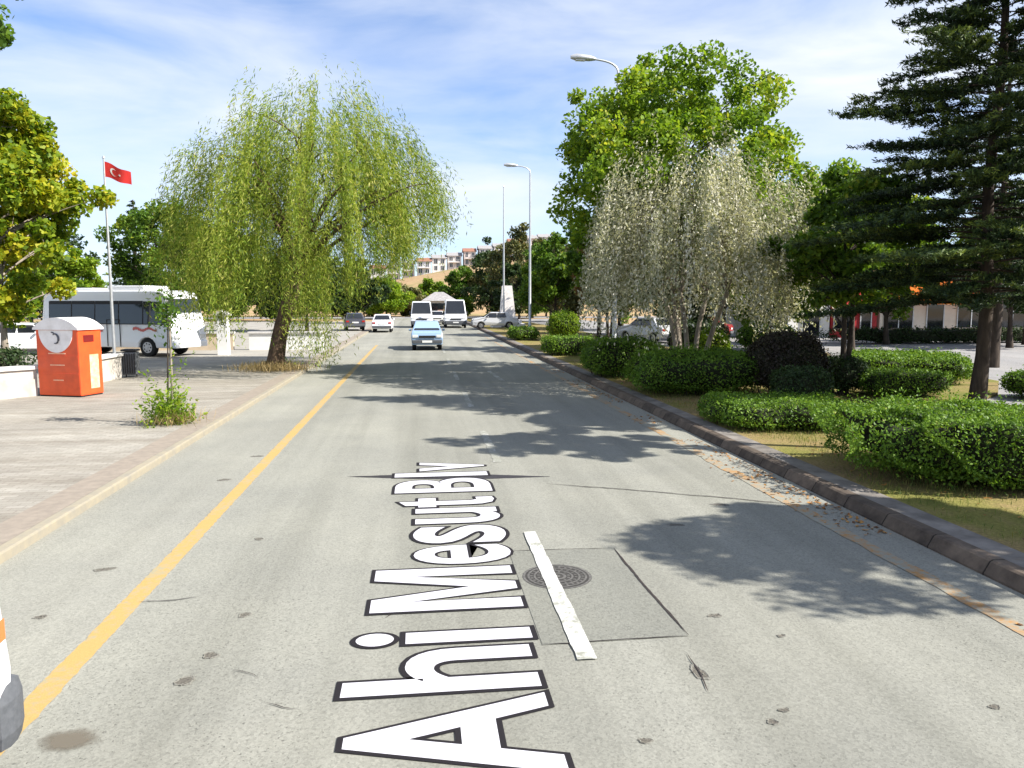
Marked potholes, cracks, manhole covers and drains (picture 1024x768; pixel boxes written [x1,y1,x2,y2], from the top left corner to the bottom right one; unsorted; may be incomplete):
manhole cover [523,564,592,589]
